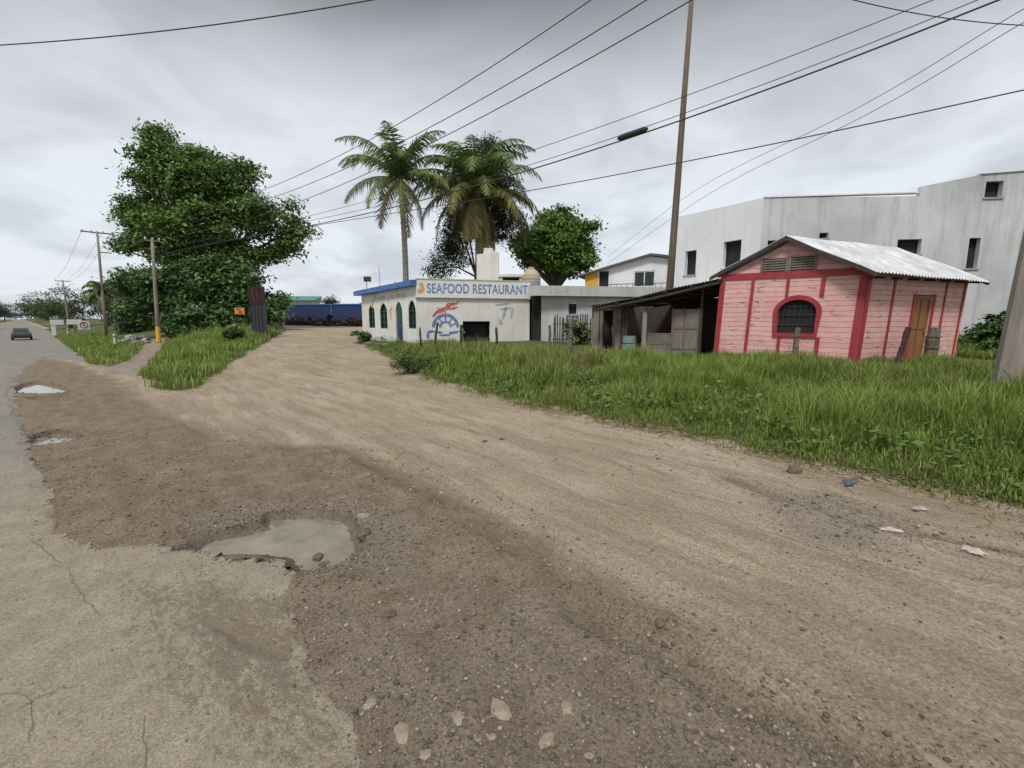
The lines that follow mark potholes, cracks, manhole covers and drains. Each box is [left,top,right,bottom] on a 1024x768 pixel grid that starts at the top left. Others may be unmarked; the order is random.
crack [29,538,99,614]
pothole [164,506,371,575]
crack [6,685,77,743]
pothole [13,381,74,394]
pothole [26,429,87,446]
